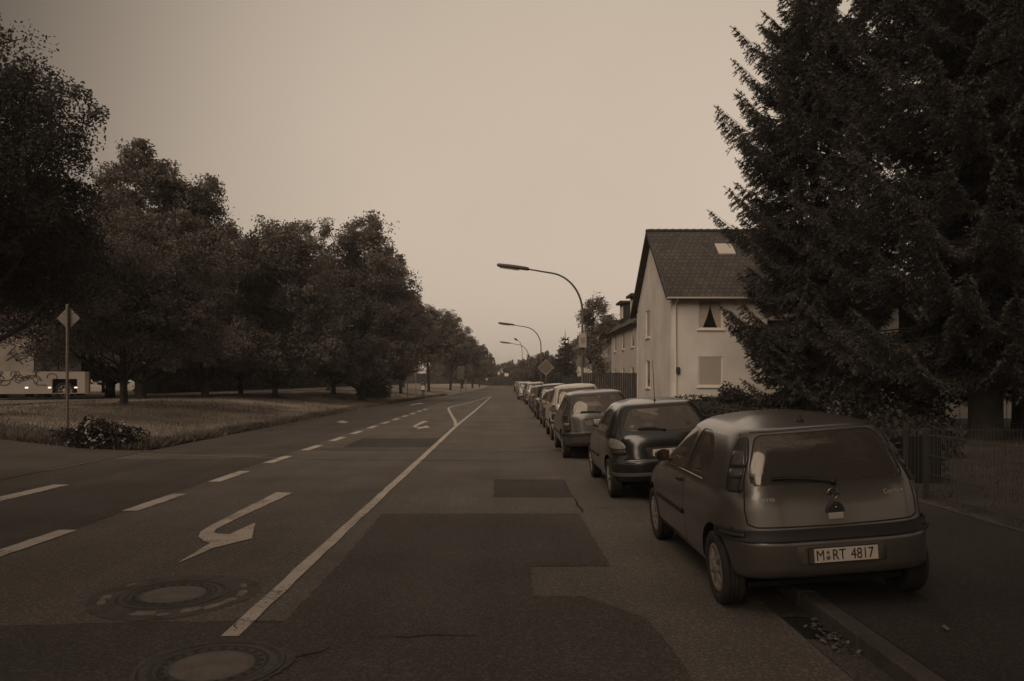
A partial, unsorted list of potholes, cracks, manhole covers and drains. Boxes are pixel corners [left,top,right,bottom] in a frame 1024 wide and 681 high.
manhole cover [128,638,296,681]
manhole cover [84,575,262,621]
